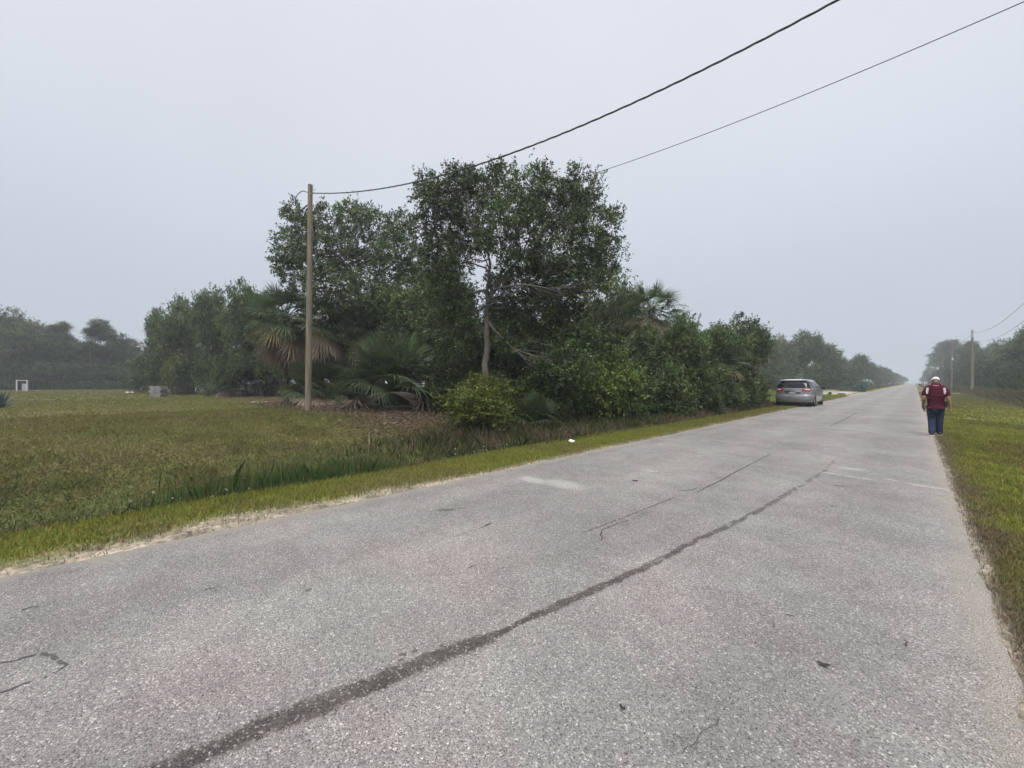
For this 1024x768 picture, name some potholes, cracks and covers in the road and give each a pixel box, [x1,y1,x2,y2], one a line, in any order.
crack [584,454,770,541]
crack [0,652,69,693]
crack [677,689,740,754]
